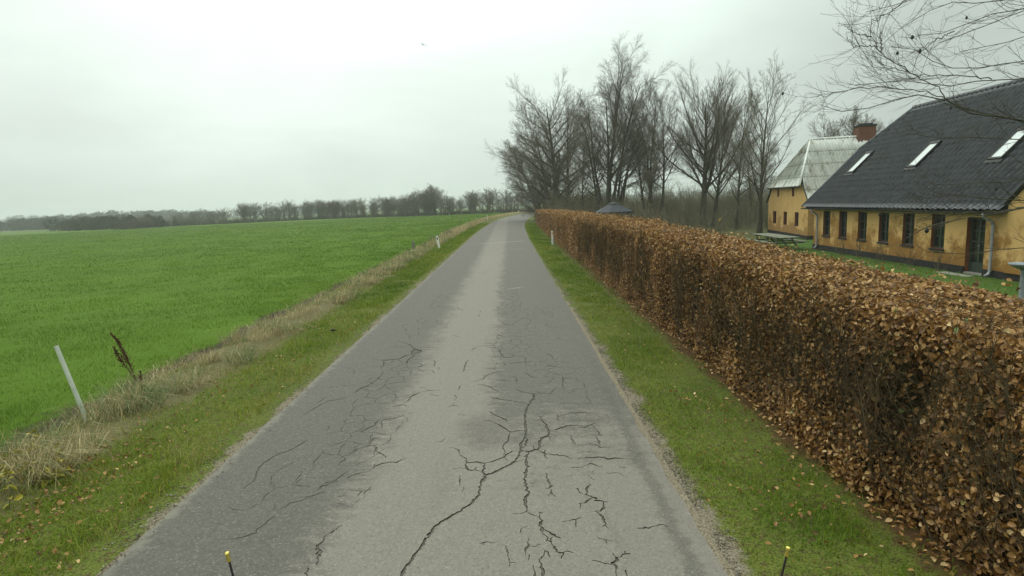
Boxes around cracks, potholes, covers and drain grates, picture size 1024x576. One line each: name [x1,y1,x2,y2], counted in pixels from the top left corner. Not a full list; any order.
crack [229,274,631,576]
